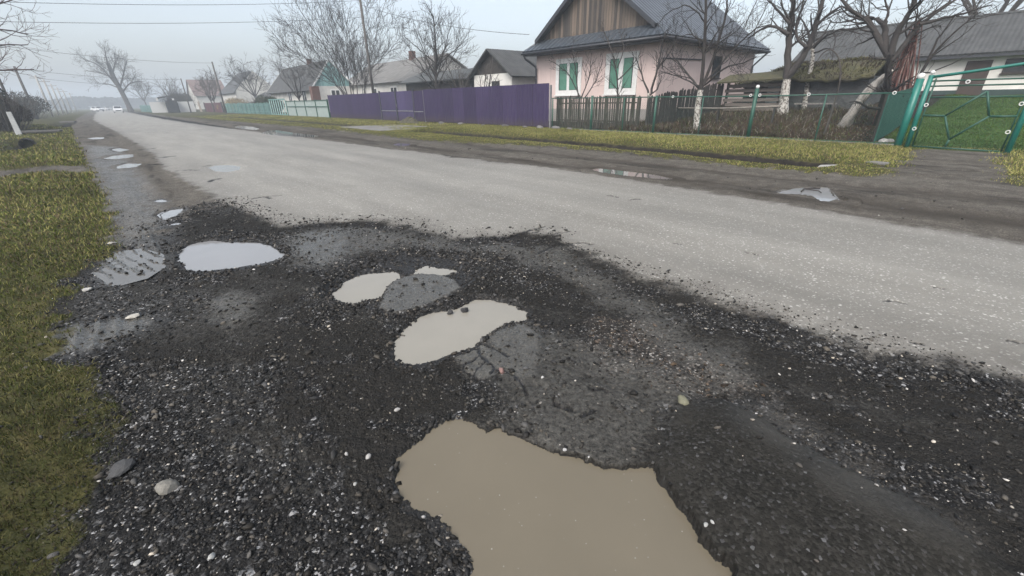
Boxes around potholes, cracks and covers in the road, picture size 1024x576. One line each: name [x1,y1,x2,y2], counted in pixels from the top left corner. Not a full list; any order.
pothole [591,168,671,180]
pothole [154,206,189,220]
pothole [388,293,535,369]
pothole [319,251,491,317]
pothole [766,185,846,203]
pothole [388,419,739,576]
pothole [175,234,290,275]
crack [461,329,530,396]
